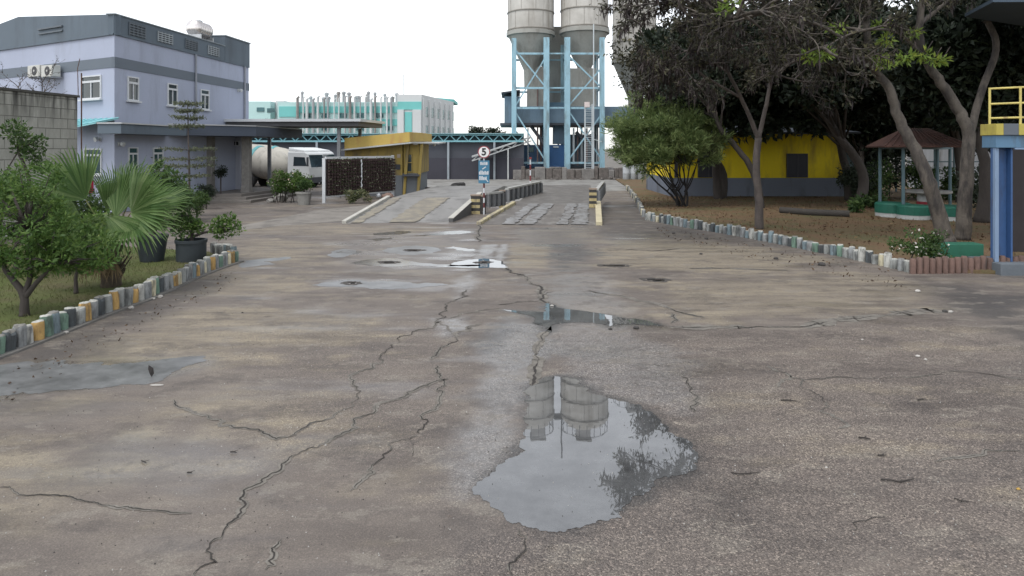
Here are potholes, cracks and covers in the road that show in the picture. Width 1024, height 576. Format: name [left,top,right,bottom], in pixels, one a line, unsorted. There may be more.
crack [2,289,548,576]
crack [588,290,945,330]
crack [678,372,701,412]
